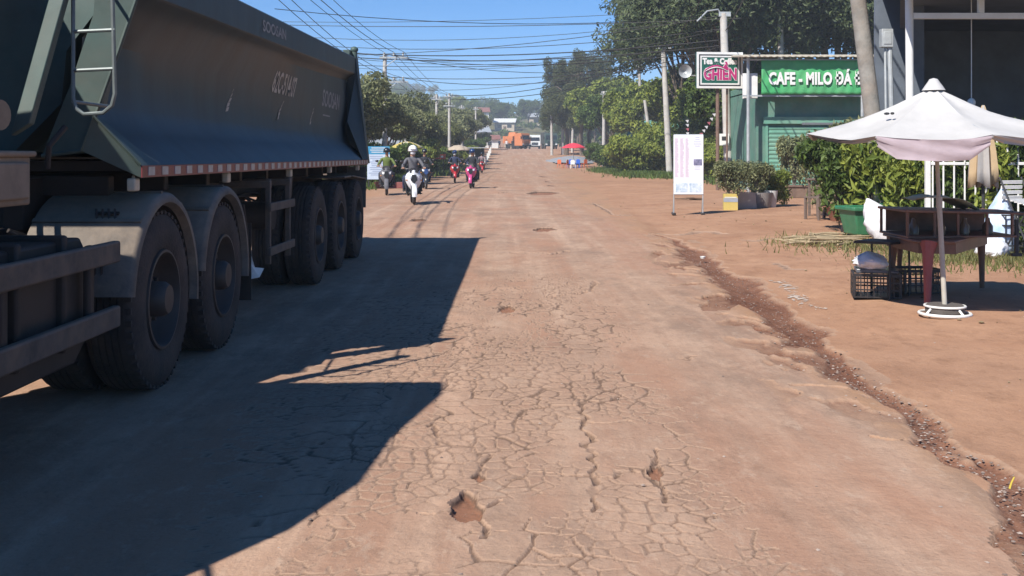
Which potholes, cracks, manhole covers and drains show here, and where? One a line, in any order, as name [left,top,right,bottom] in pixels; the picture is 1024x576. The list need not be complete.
pothole [631,448,670,504]
crack [146,231,1024,576]
pothole [416,490,503,539]
pothole [469,453,493,483]
